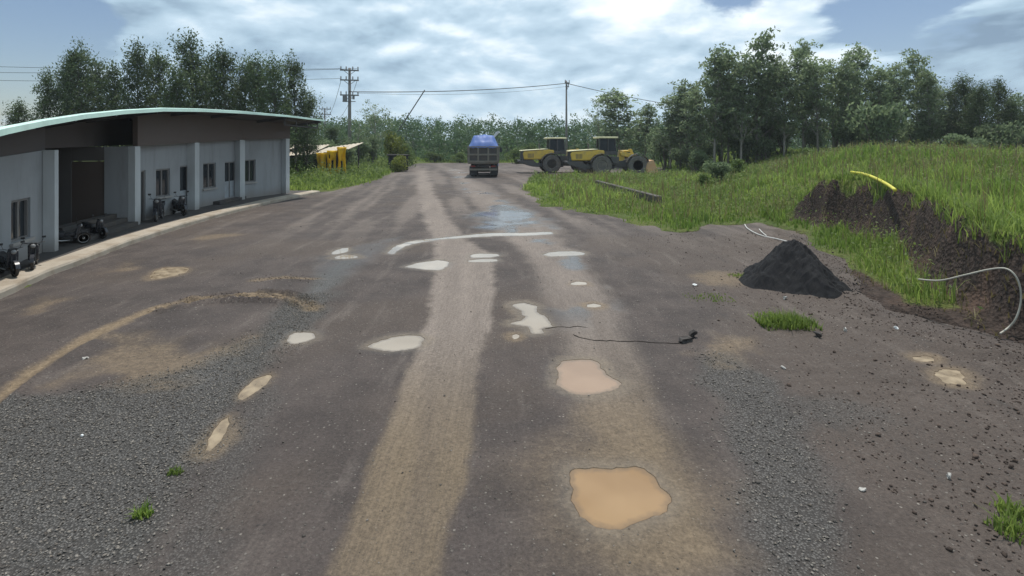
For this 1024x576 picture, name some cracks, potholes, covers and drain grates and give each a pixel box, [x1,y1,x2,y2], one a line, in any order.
pothole [510,302,553,334]
pothole [569,466,672,530]
pothole [367,335,425,352]
pothole [286,332,316,344]
pothole [237,374,272,400]
pothole [556,359,622,395]
pothole [205,416,230,451]
pothole [405,260,450,270]
